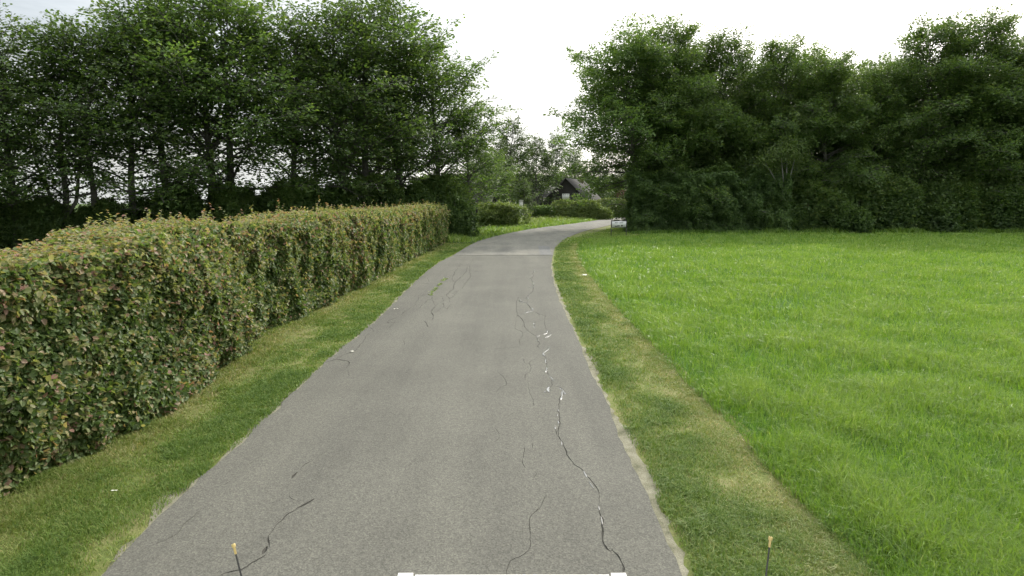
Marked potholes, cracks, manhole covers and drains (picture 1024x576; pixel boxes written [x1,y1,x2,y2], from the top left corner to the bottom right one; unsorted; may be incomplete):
crack [325,261,472,368]
crack [220,447,330,576]
crack [496,270,625,573]
